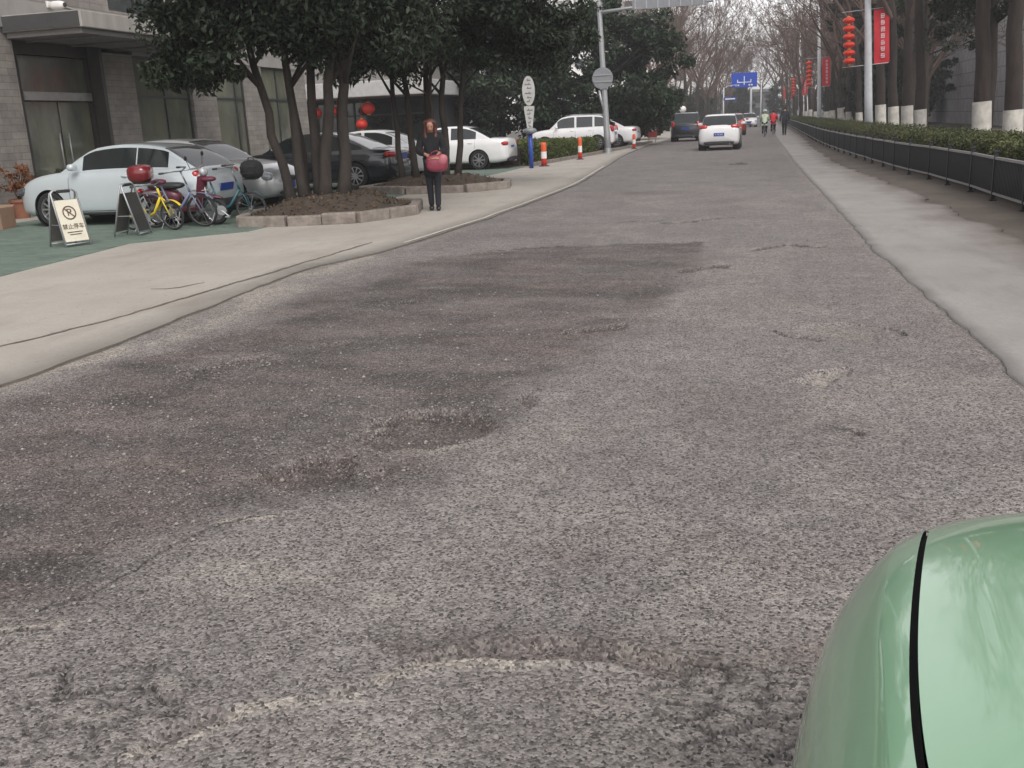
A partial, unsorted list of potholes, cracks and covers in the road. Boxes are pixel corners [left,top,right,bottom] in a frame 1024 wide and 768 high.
crack [755,243,826,251]
crack [0,513,279,634]
pothole [787,366,854,389]
crack [827,425,866,436]
pothole [242,452,371,491]
pothole [281,634,717,704]
crack [772,330,824,342]
pothole [343,406,510,453]
pothole [556,322,632,337]
crack [0,662,212,768]
crack [878,326,909,336]
